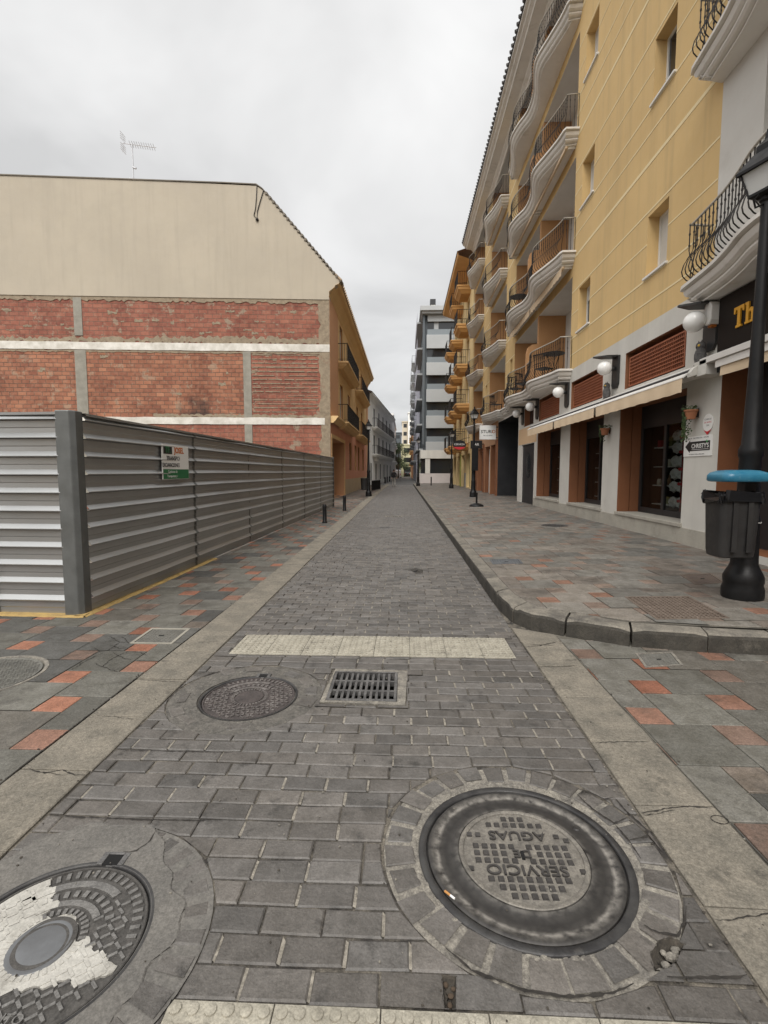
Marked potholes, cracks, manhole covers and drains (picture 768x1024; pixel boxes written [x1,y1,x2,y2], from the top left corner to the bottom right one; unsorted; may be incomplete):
utility cover [129,628,191,645]
drain grate [320,669,407,706]
drain grate [625,596,729,626]
manhole cover [198,673,298,721]
utility cover [635,652,683,668]
crack [577,790,709,858]
crack [715,913,768,921]
manhole cover [418,787,639,959]
manhole cover [0,852,155,1024]
manhole cover [0,655,50,691]
